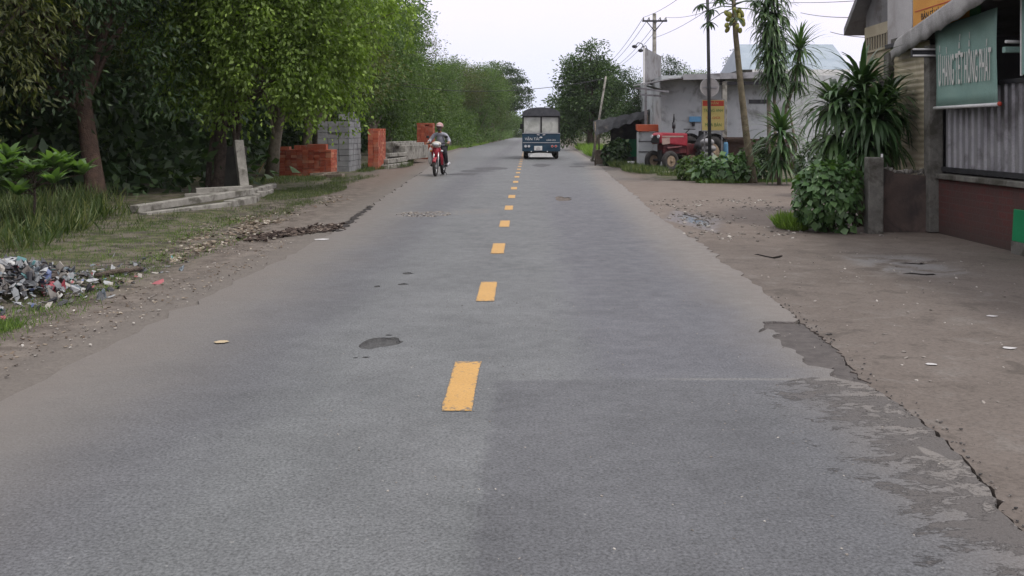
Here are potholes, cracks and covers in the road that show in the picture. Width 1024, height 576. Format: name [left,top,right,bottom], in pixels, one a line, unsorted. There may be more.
pothole [359,337,404,349]
